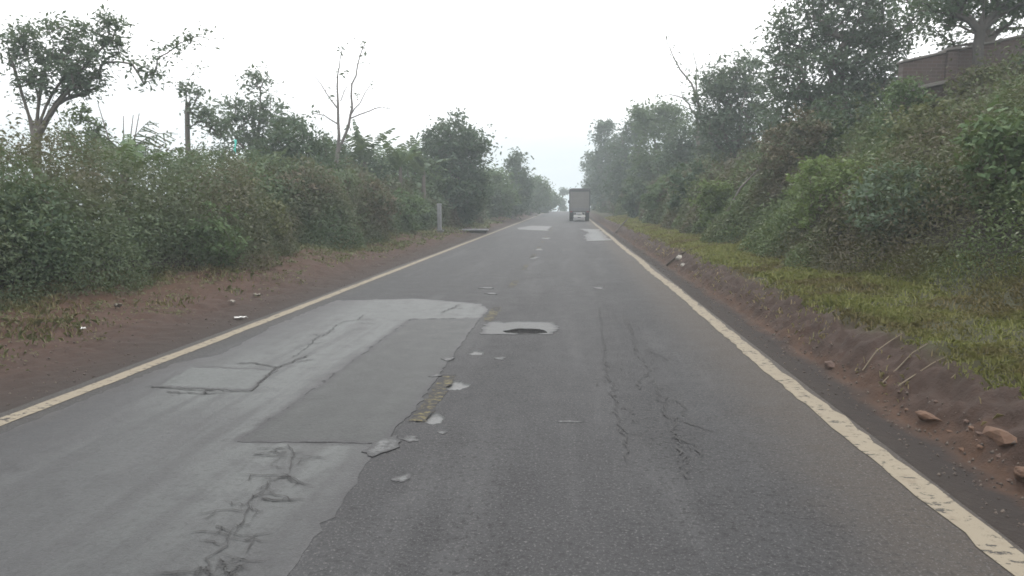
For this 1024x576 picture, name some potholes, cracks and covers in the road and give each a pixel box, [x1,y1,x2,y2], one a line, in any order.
crack [152,315,363,394]
pothole [415,413,445,424]
crack [156,445,321,576]
crack [595,307,639,462]
crack [625,319,713,478]
